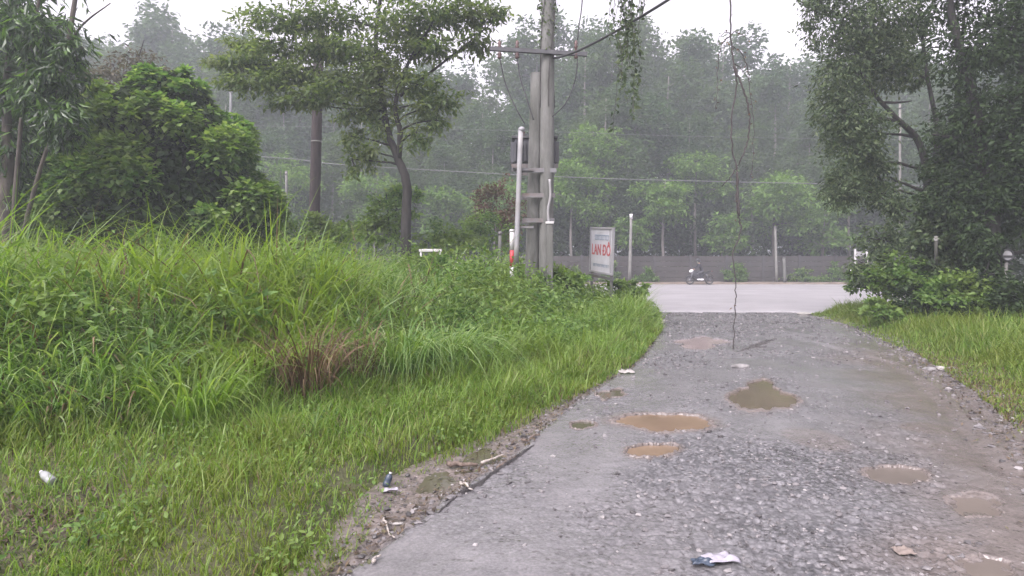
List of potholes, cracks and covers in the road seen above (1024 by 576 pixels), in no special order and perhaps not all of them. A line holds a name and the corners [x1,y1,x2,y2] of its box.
pothole [942,490,1006,518]
pothole [569,419,599,430]
pothole [608,411,717,434]
pothole [623,442,683,460]
pothole [946,552,1020,576]
pothole [594,387,628,401]
pothole [860,464,935,485]
pothole [724,377,804,413]
pothole [669,335,736,352]
crack [438,445,534,513]
